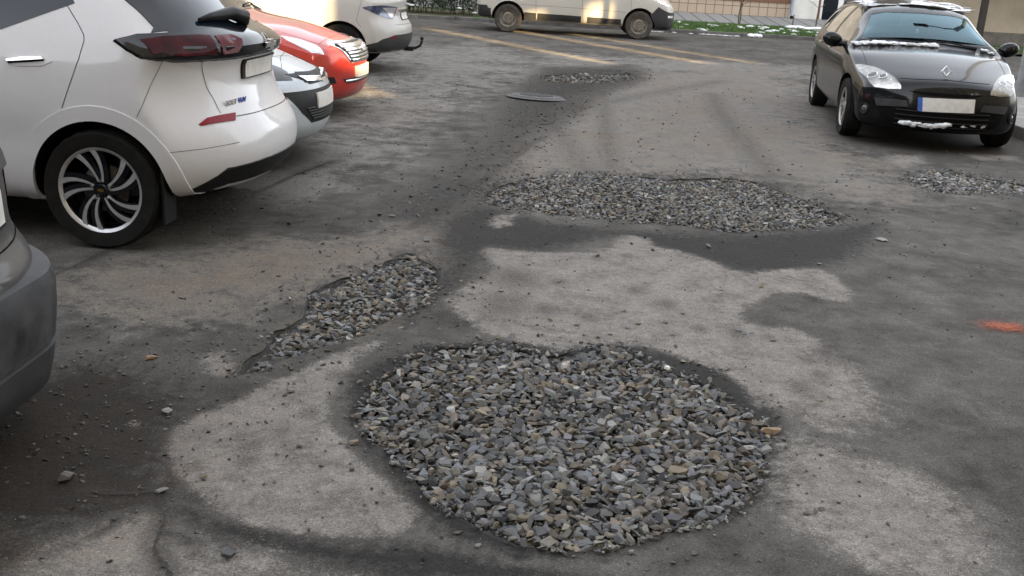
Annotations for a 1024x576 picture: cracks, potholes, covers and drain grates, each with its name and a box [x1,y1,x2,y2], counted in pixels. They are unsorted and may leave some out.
crack [92,484,199,576]
pothole [481,175,843,233]
pothole [539,73,631,84]
pothole [352,345,770,551]
manhole cover [506,93,566,101]
pothole [231,252,443,376]
